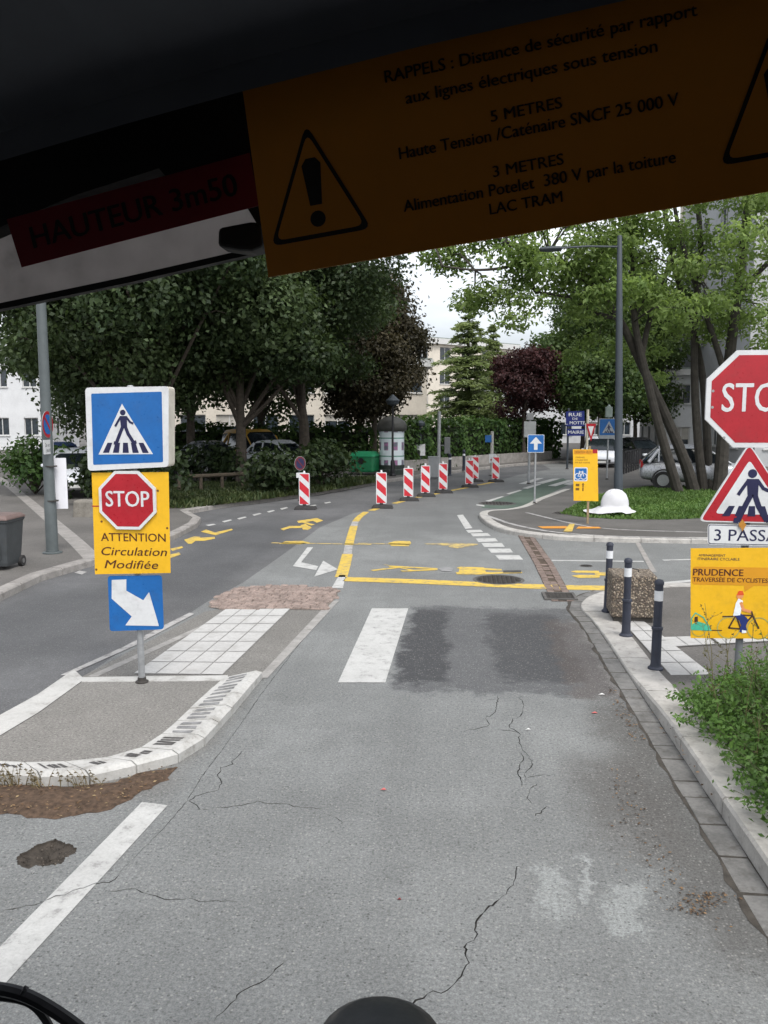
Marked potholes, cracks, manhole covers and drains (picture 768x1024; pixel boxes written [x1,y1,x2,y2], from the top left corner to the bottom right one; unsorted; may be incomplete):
crack [464,696,546,816]
drain grate [541,592,578,601]
crack [214,963,283,1021]
pothole [16,839,77,869]
manhole cover [473,575,524,585]
crack [189,750,343,823]
crack [6,875,235,910]
crack [413,863,524,1004]
